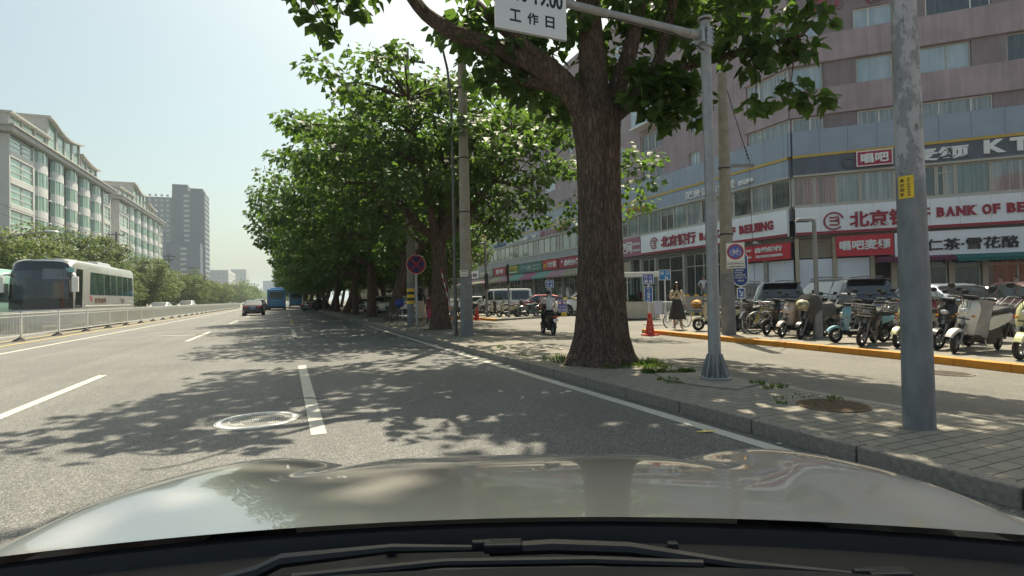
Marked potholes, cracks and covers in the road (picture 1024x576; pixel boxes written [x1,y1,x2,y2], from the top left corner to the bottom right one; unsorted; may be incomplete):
manhole cover [796,399,872,413]
manhole cover [214,411,299,430]
